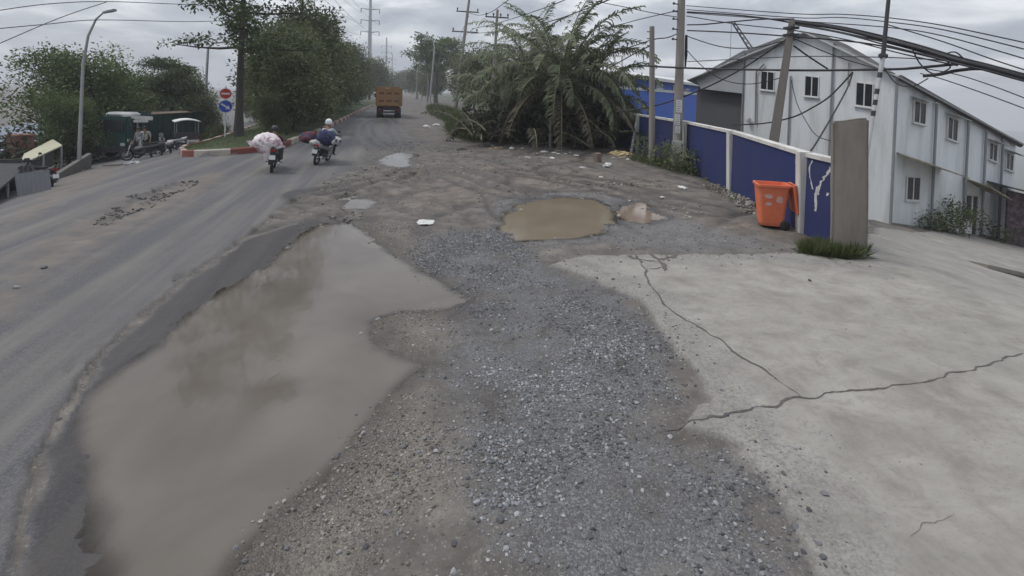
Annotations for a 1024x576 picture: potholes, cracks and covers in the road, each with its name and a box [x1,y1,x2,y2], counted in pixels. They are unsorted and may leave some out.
pothole [493,195,632,245]
pothole [334,193,378,210]
pothole [91,180,201,226]
pothole [11,218,481,576]
pothole [372,151,422,168]
pothole [610,201,674,225]
crack [628,253,1022,431]
